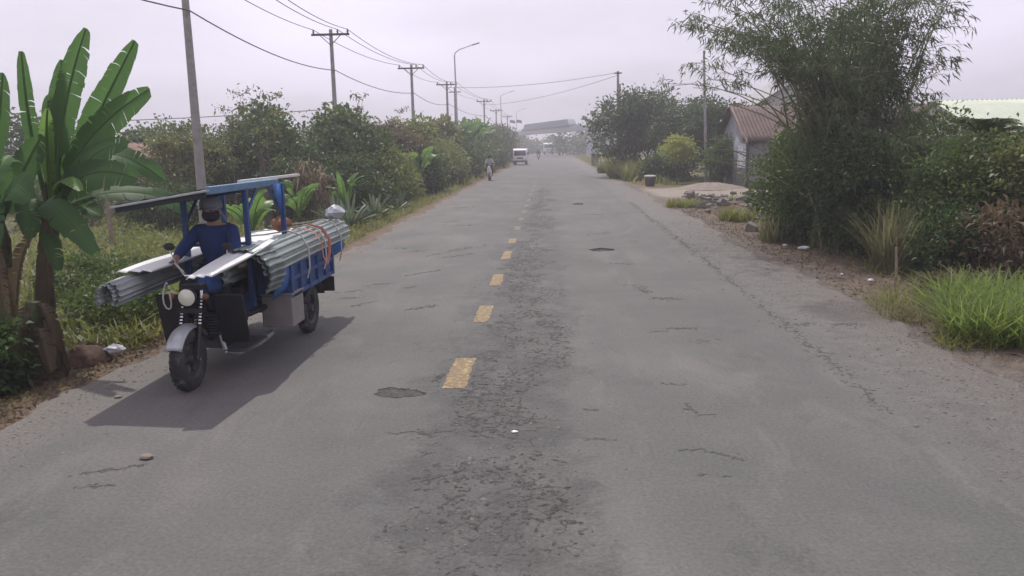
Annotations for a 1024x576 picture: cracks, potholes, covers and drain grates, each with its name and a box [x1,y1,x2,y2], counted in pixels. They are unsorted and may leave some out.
crack [661,382,724,417]
crack [647,327,722,345]
crack [623,284,687,302]
crack [334,188,595,576]
crack [677,447,744,477]
